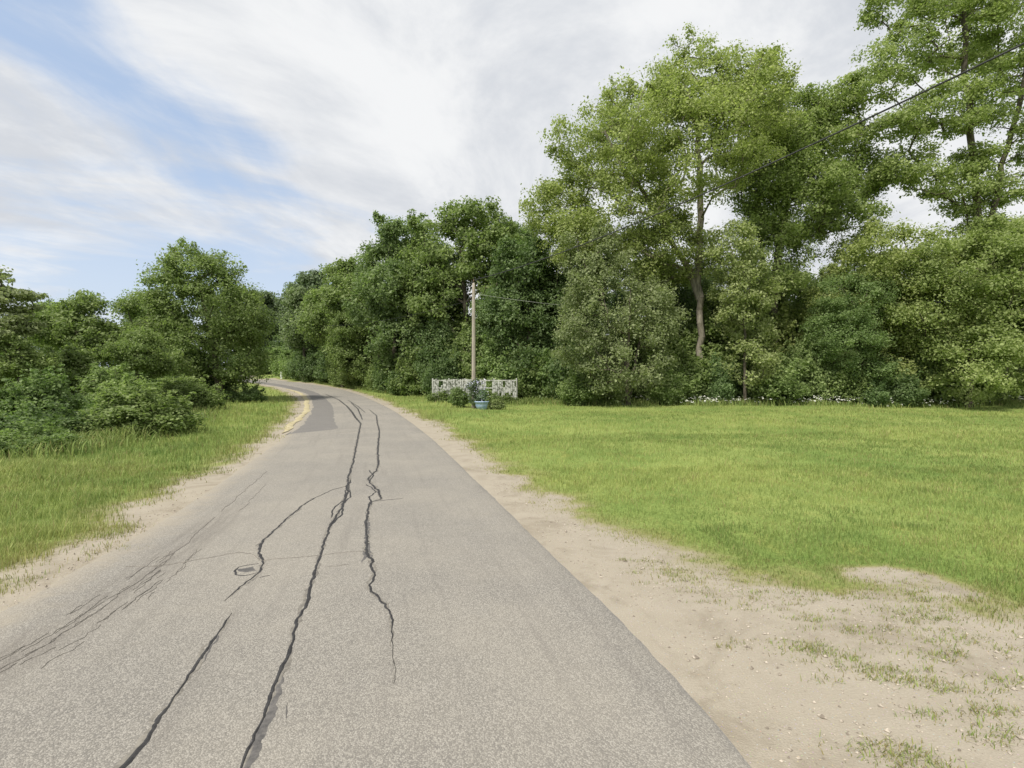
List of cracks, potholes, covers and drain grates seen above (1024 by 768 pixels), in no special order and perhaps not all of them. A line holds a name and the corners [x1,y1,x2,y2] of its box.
crack [0,472,362,768]
